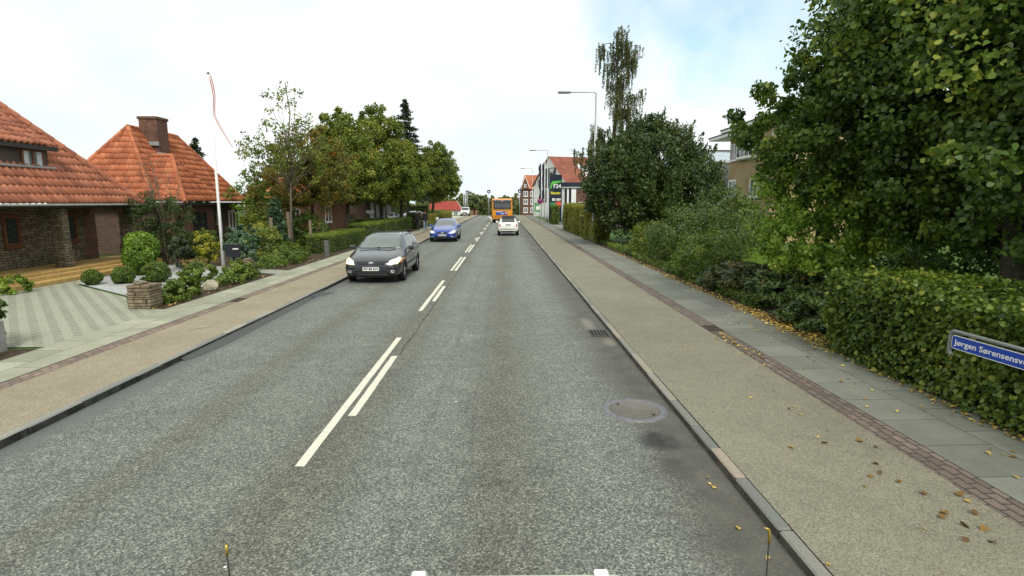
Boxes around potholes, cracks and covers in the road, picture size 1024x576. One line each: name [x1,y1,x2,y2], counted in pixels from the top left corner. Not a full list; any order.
manhole cover [602,398,669,423]
